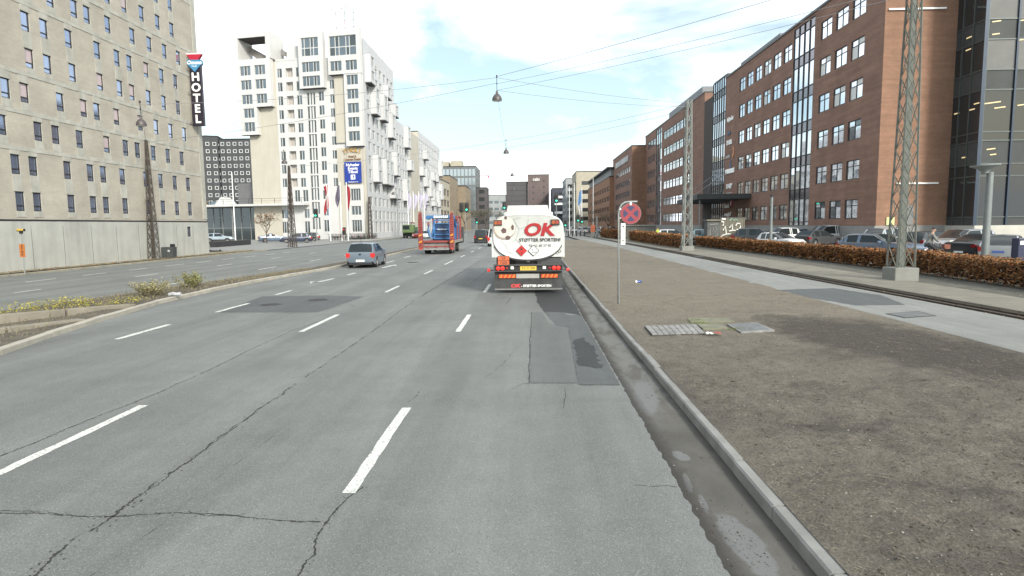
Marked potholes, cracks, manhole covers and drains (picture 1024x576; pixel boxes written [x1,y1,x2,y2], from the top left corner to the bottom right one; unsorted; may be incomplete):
manhole cover [727,322,774,334]
crack [0,261,480,576]
